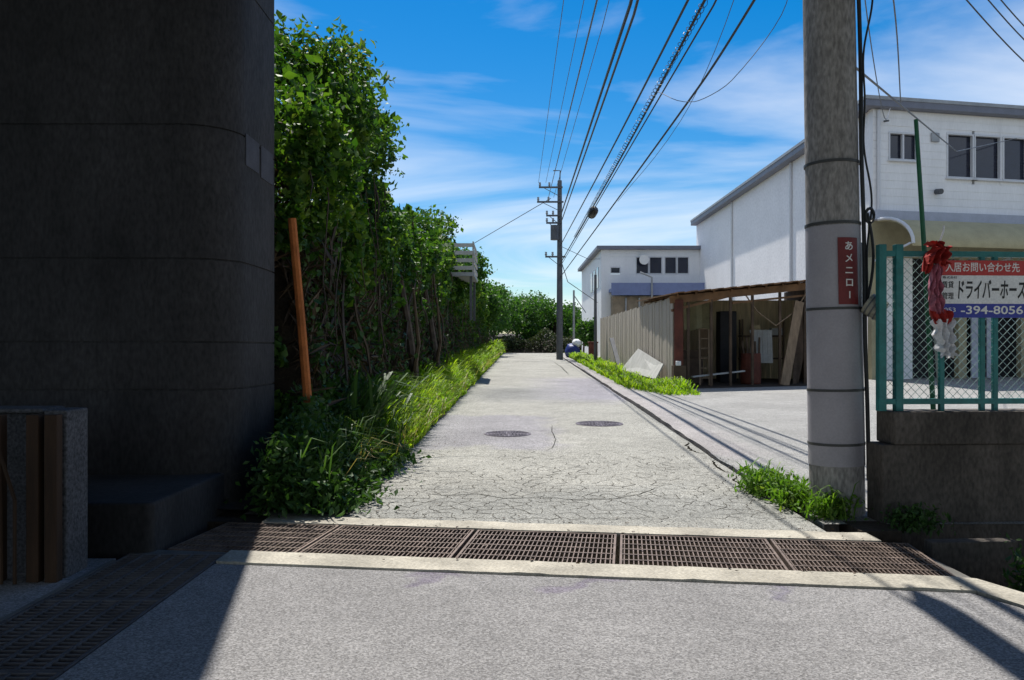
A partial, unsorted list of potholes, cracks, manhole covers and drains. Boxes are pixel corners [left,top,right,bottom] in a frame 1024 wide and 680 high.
drain grate [770,539,956,577]
crack [350,450,783,520]
drain grate [299,525,474,558]
drain grate [619,534,788,570]
drain grate [168,522,339,553]
drain grate [44,554,225,601]
drain grate [0,600,163,673]
drain grate [455,530,616,564]
drain grate [0,671,63,680]
